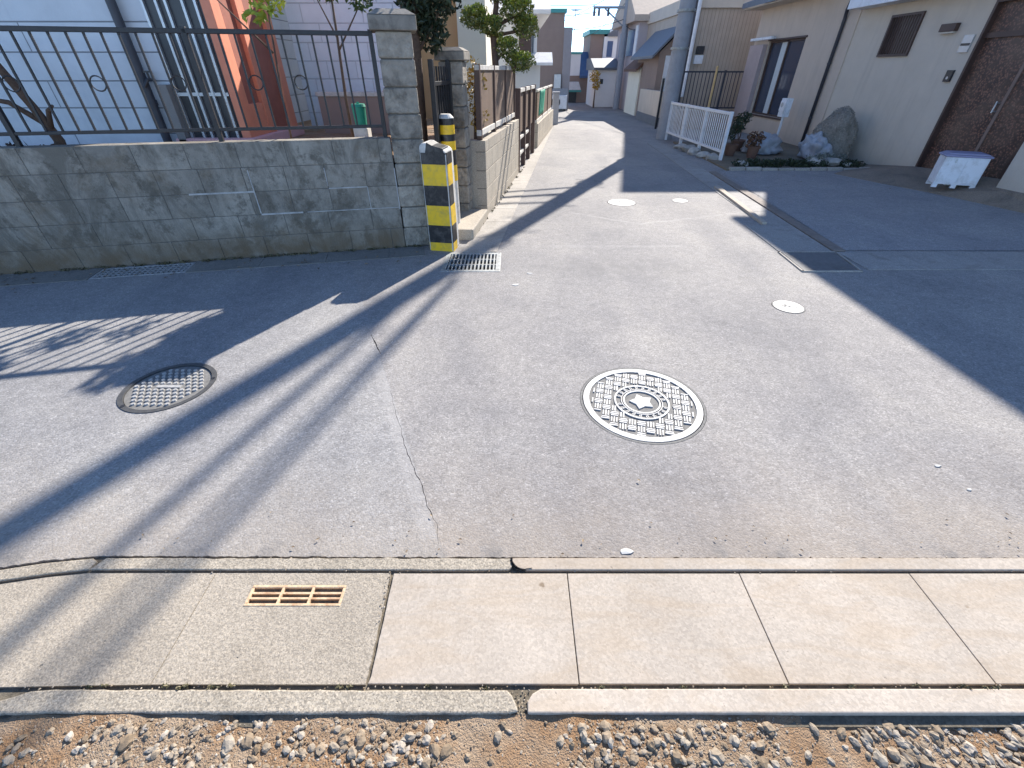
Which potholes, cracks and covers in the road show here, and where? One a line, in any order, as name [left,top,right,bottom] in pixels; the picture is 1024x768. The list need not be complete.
drain grate [440,253,501,272]
drain grate [243,585,346,606]
utility cover [771,300,806,314]
drain grate [89,262,196,279]
crack [390,391,439,544]
manhole cover [580,368,707,445]
manhole cover [117,363,217,414]
